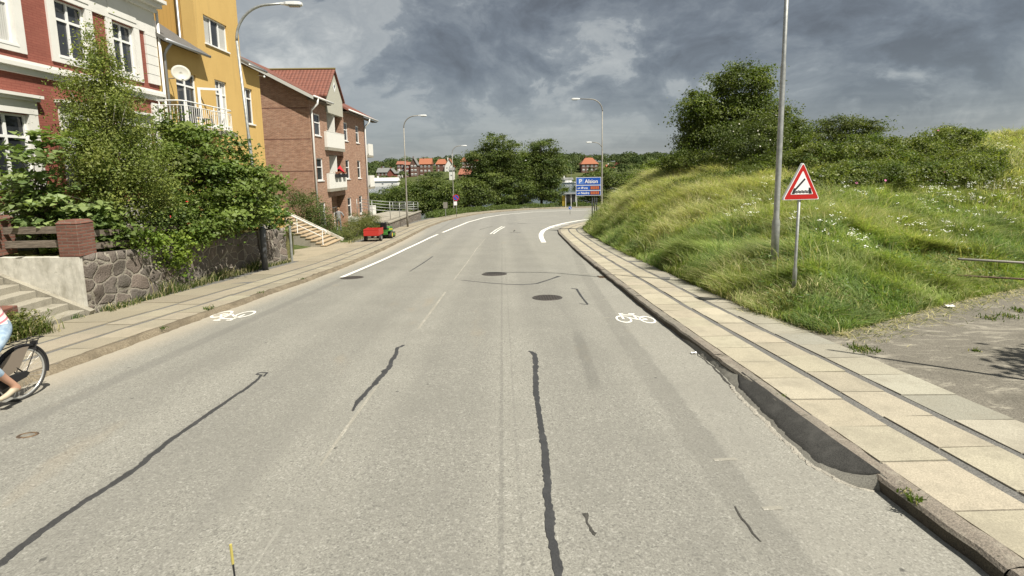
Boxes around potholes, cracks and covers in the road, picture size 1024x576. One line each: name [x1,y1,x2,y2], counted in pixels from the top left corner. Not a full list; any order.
pothole [729,385,874,492]
